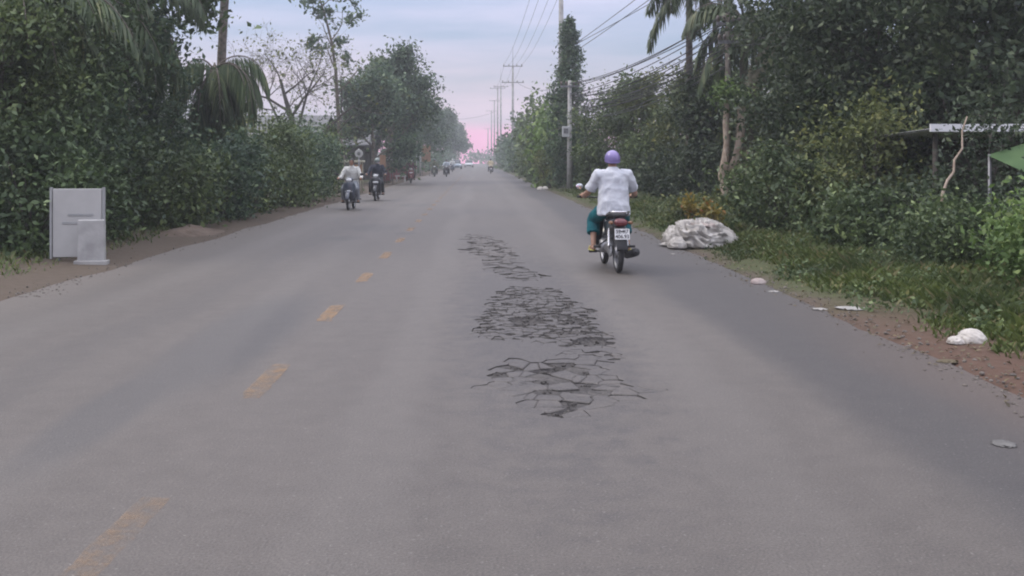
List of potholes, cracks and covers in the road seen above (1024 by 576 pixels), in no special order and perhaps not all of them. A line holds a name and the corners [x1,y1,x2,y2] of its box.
crack [461,234,668,418]
